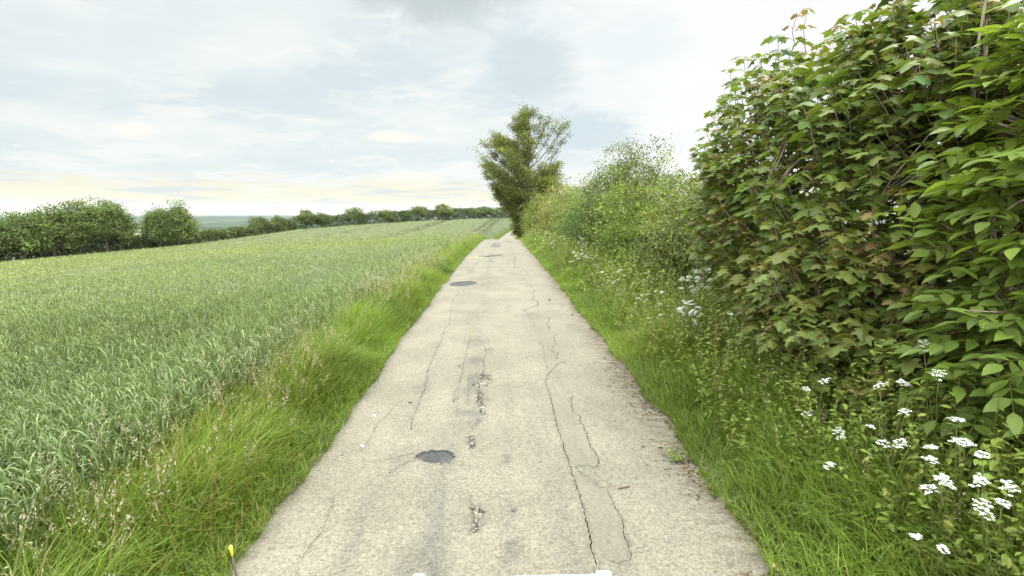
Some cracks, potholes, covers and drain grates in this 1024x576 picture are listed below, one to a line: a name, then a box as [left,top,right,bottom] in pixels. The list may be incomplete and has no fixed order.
pothole [475,390,487,415]
crack [341,264,488,473]
crack [512,254,633,574]
pothole [468,372,493,389]
pothole [469,505,485,533]
crack [301,497,336,560]
